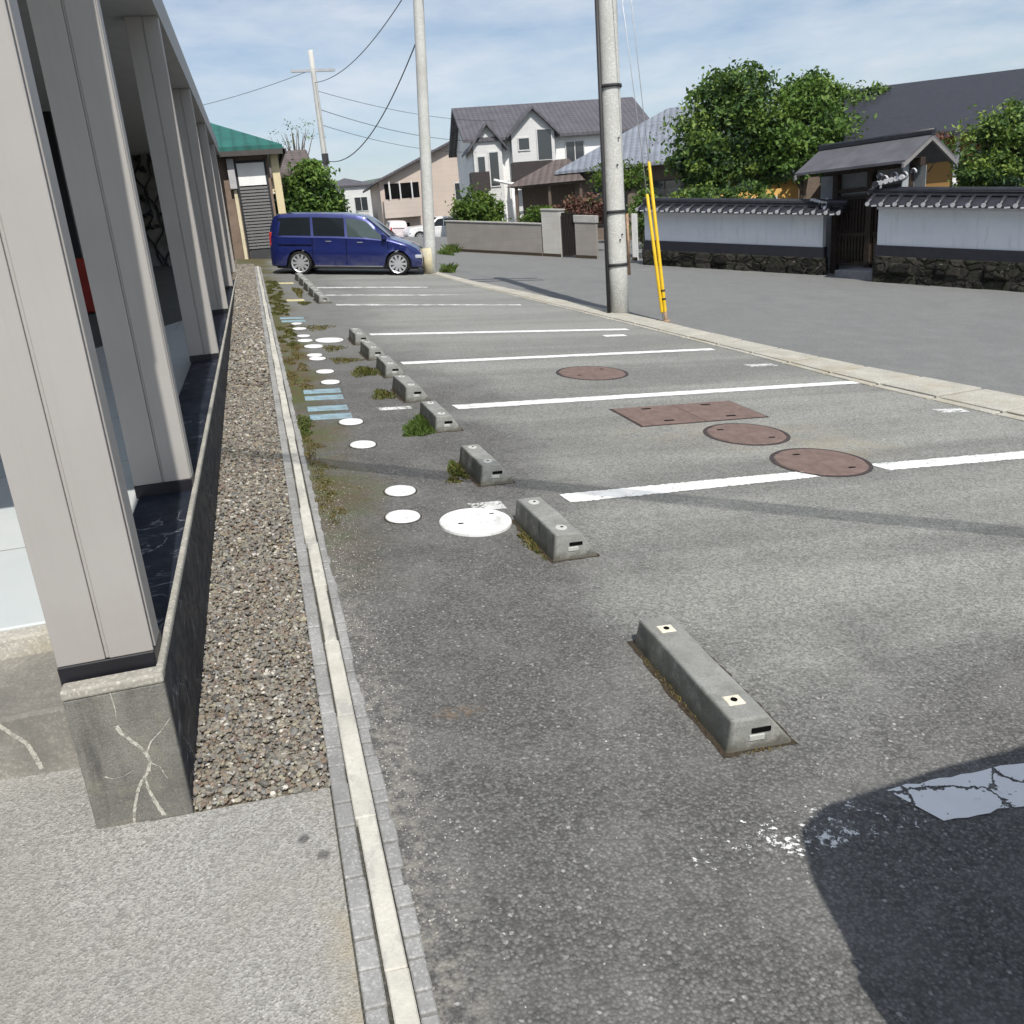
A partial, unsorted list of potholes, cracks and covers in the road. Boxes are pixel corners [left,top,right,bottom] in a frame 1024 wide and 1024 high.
manhole cover [703,423,791,446]
manhole cover [609,401,769,427]
manhole cover [439,508,512,537]
manhole cover [556,366,629,380]
manhole cover [769,448,873,477]
